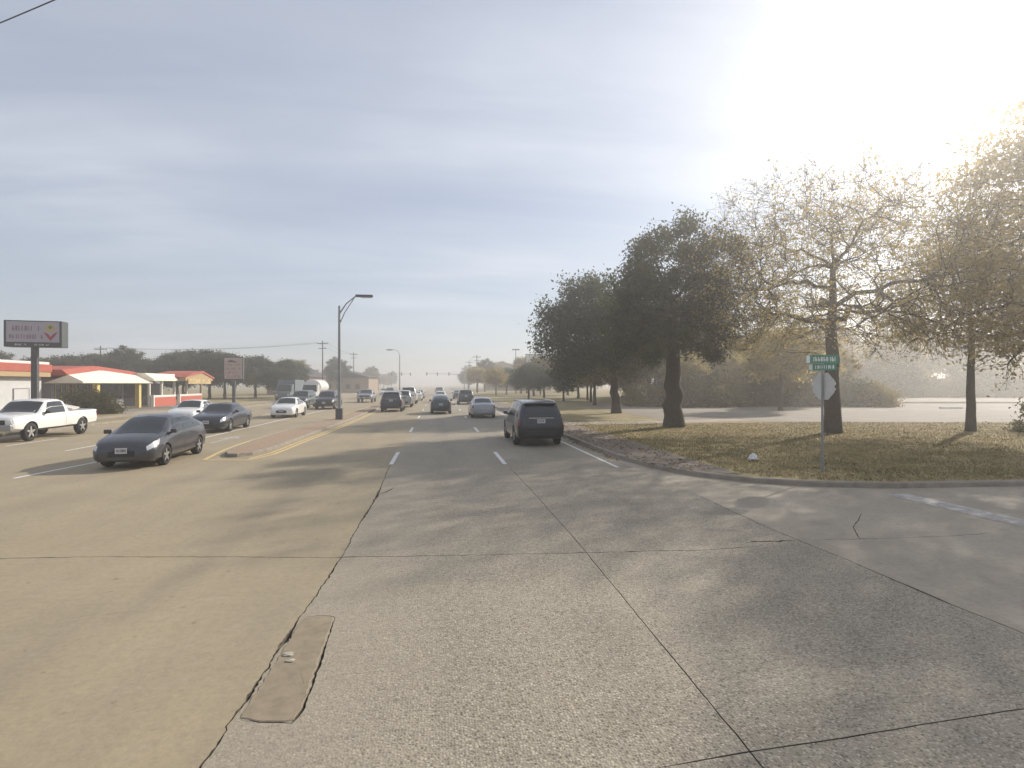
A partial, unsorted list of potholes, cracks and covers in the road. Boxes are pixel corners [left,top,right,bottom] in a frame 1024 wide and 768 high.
crack [0,464,1024,768]
